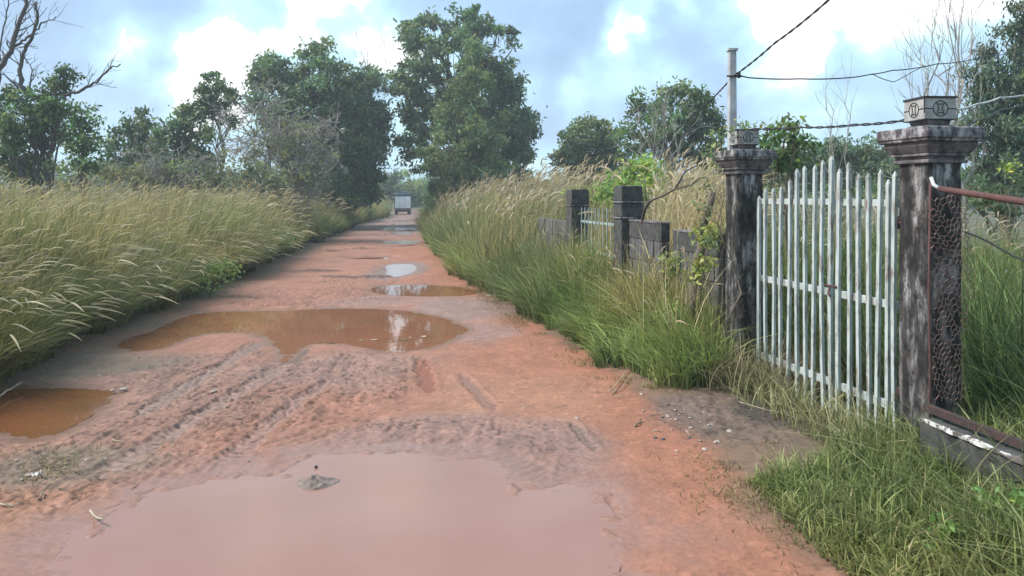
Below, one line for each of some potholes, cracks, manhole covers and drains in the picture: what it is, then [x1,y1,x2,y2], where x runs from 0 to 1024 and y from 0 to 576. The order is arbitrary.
pothole [381,263,417,277]
pothole [32,447,642,576]
pothole [369,284,481,296]
pothole [0,386,119,441]
pothole [115,307,471,362]
